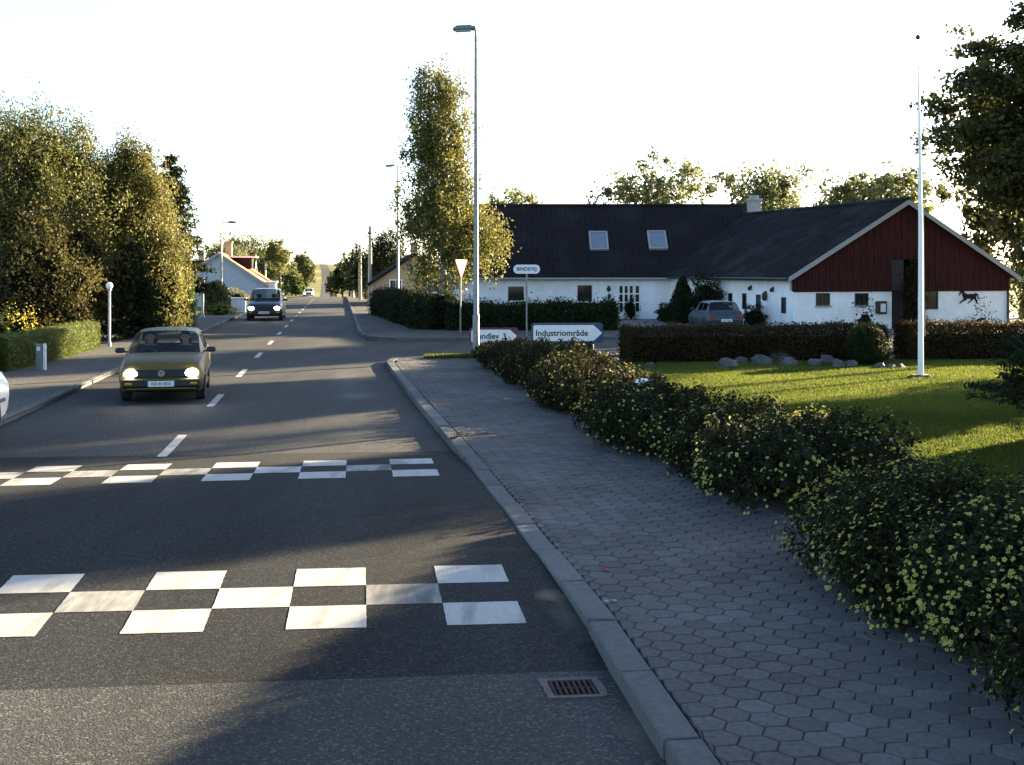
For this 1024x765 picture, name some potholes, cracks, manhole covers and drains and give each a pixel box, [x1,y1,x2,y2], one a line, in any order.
drain grate [538,676,608,699]
